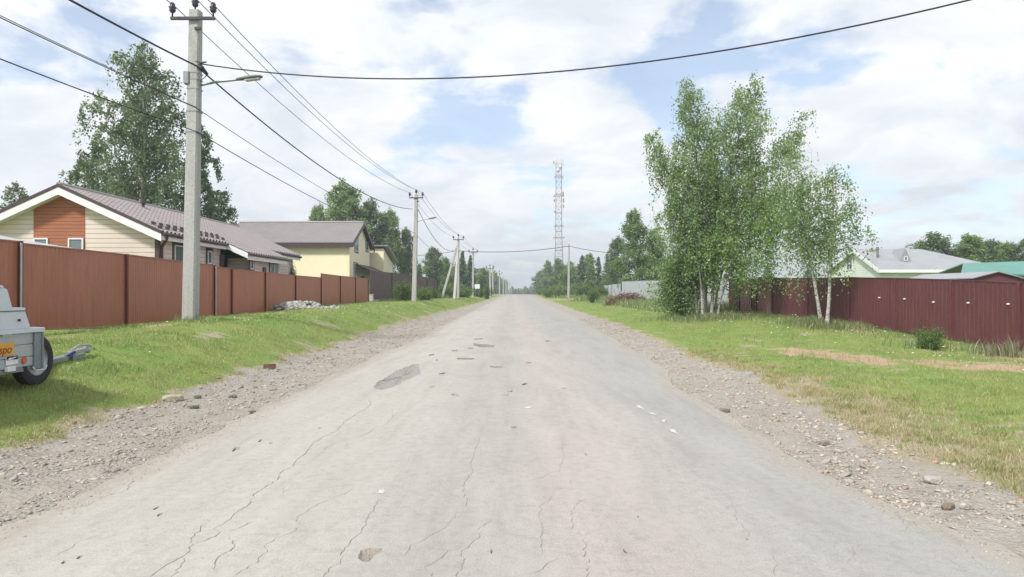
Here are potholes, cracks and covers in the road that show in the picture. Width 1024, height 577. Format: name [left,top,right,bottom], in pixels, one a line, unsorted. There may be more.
pothole [358,548,383,562]
crack [514,441,590,577]
crack [405,438,487,577]
crack [151,400,393,577]
